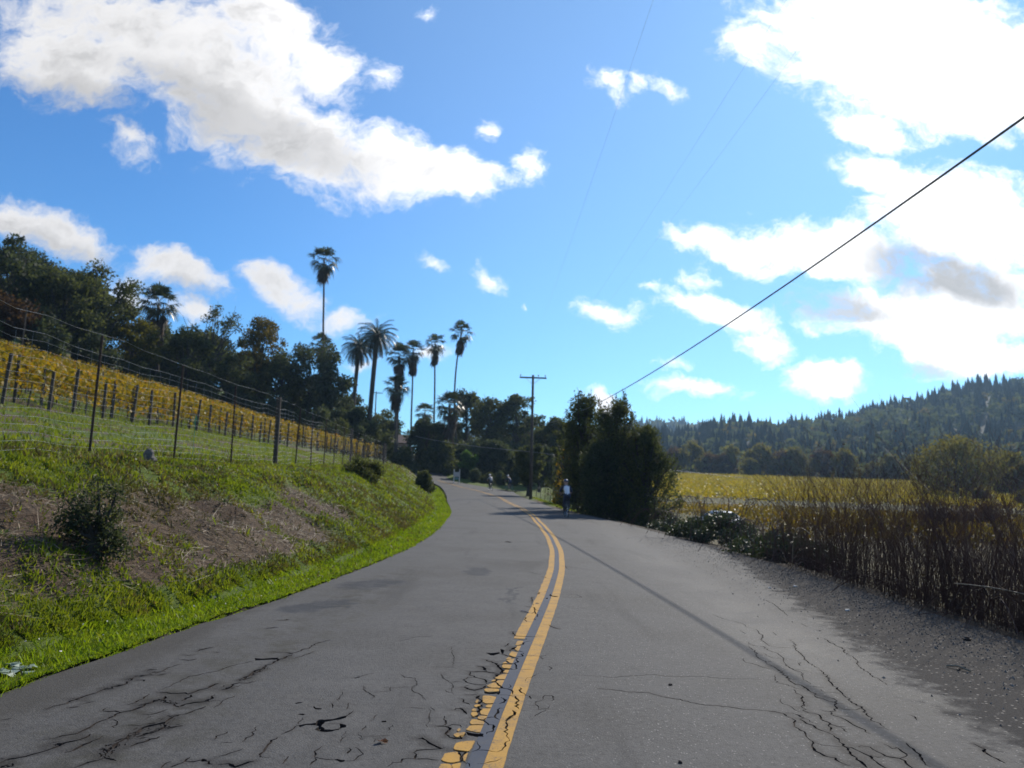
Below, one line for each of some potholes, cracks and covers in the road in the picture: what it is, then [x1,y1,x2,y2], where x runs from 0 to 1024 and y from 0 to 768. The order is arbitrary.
crack [332,572,558,767]
crack [0,641,325,768]
pothole [281,711,353,735]
crack [598,616,930,768]
